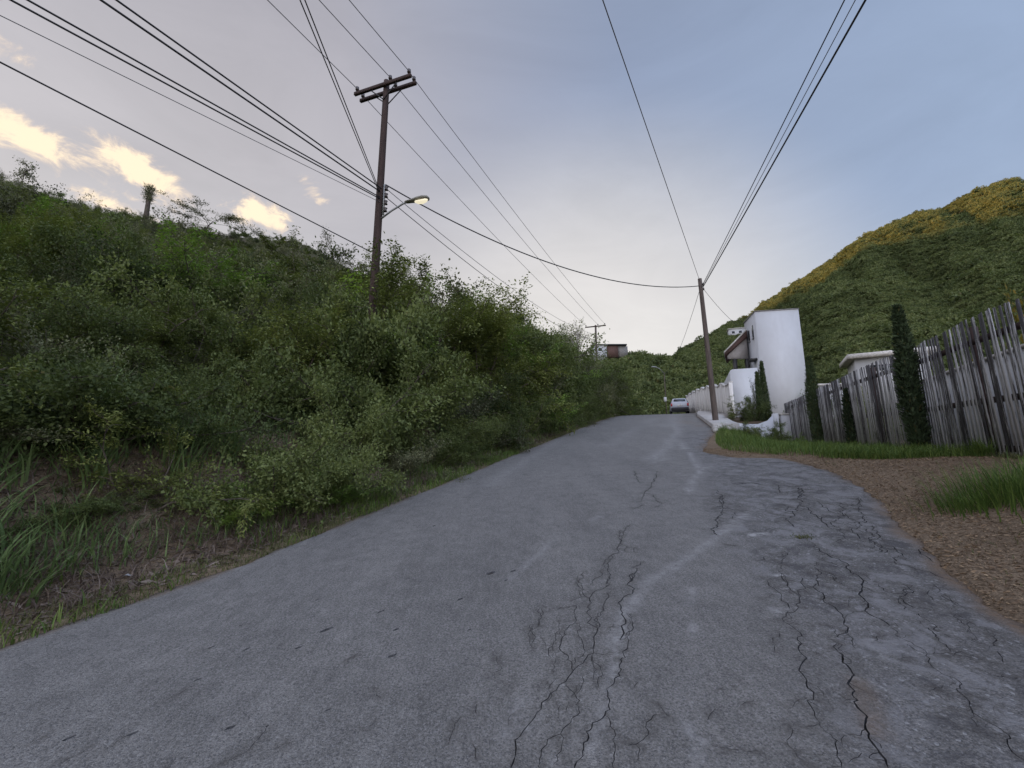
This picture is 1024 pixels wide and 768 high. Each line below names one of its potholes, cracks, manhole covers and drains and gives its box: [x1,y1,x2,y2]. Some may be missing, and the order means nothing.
crack [494,526,667,768]
crack [762,484,1024,768]
